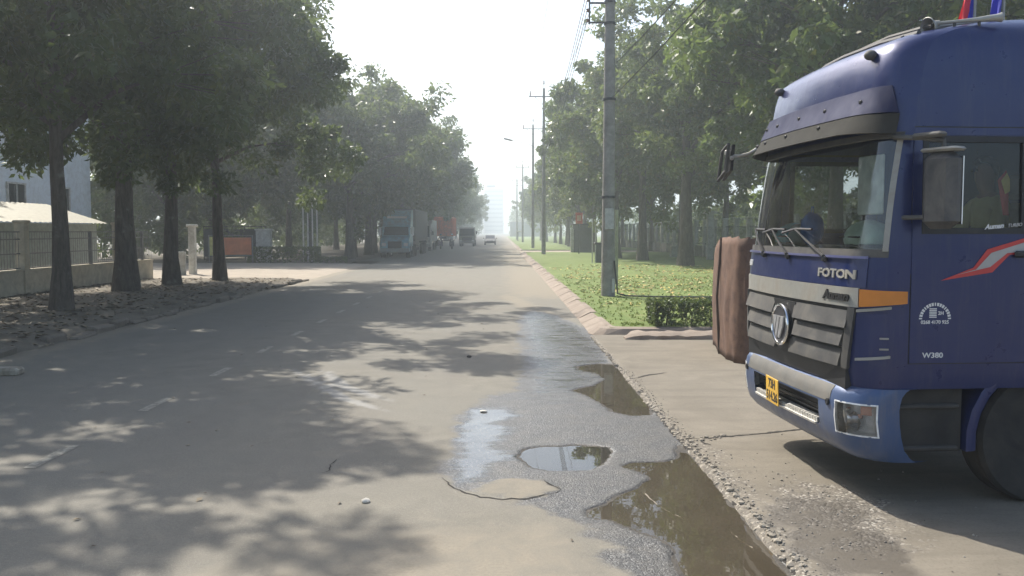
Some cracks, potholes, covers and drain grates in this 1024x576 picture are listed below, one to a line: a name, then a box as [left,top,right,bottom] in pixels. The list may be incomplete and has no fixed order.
pothole [516,444,613,471]
